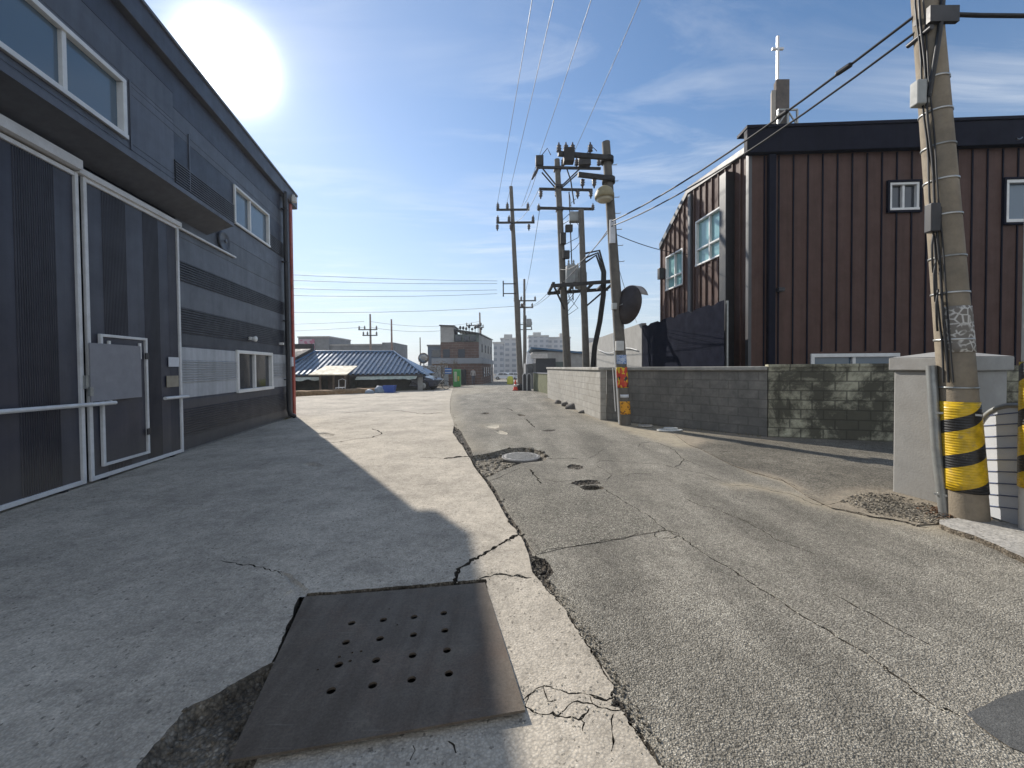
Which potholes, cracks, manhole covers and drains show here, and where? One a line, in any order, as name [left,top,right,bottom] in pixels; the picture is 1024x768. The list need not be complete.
pothole [470,447,549,479]
crack [535,490,960,716]
manhole cover [502,452,540,465]
pothole [530,555,562,603]
pothole [136,661,275,768]
crack [453,535,660,766]
